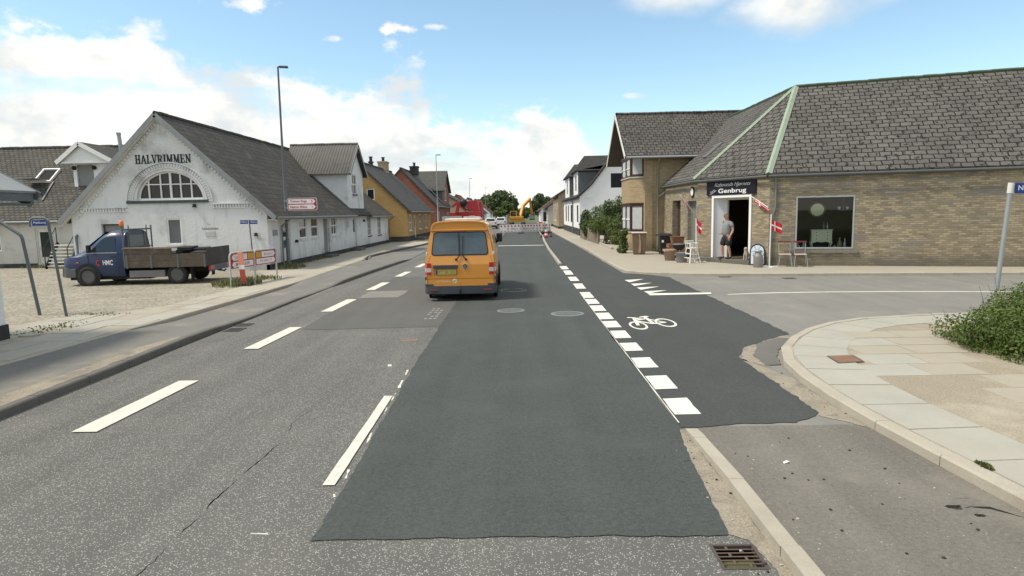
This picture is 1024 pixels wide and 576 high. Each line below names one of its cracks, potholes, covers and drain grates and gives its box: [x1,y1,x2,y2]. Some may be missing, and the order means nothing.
drain grate [709,544,771,570]
crack [966,506,1024,518]
crack [136,413,306,576]
manhole cover [828,355,865,363]
